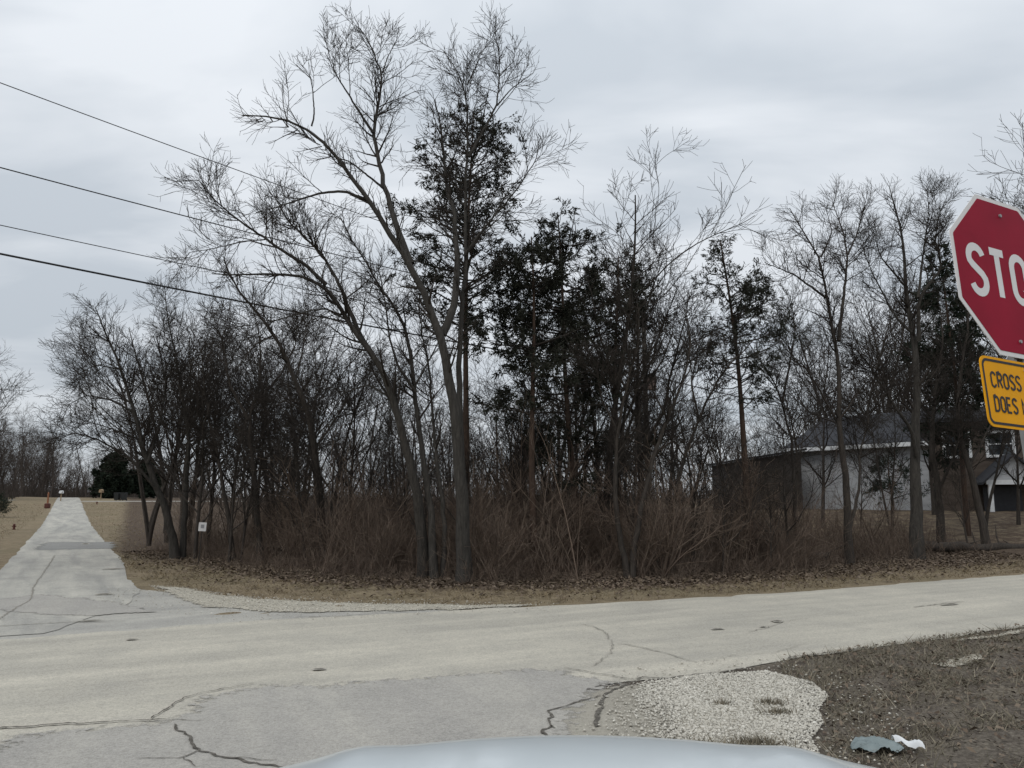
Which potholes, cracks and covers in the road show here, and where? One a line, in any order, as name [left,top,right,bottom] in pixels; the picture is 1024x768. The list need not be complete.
crack [0,682,282,767]
crack [540,624,865,735]
